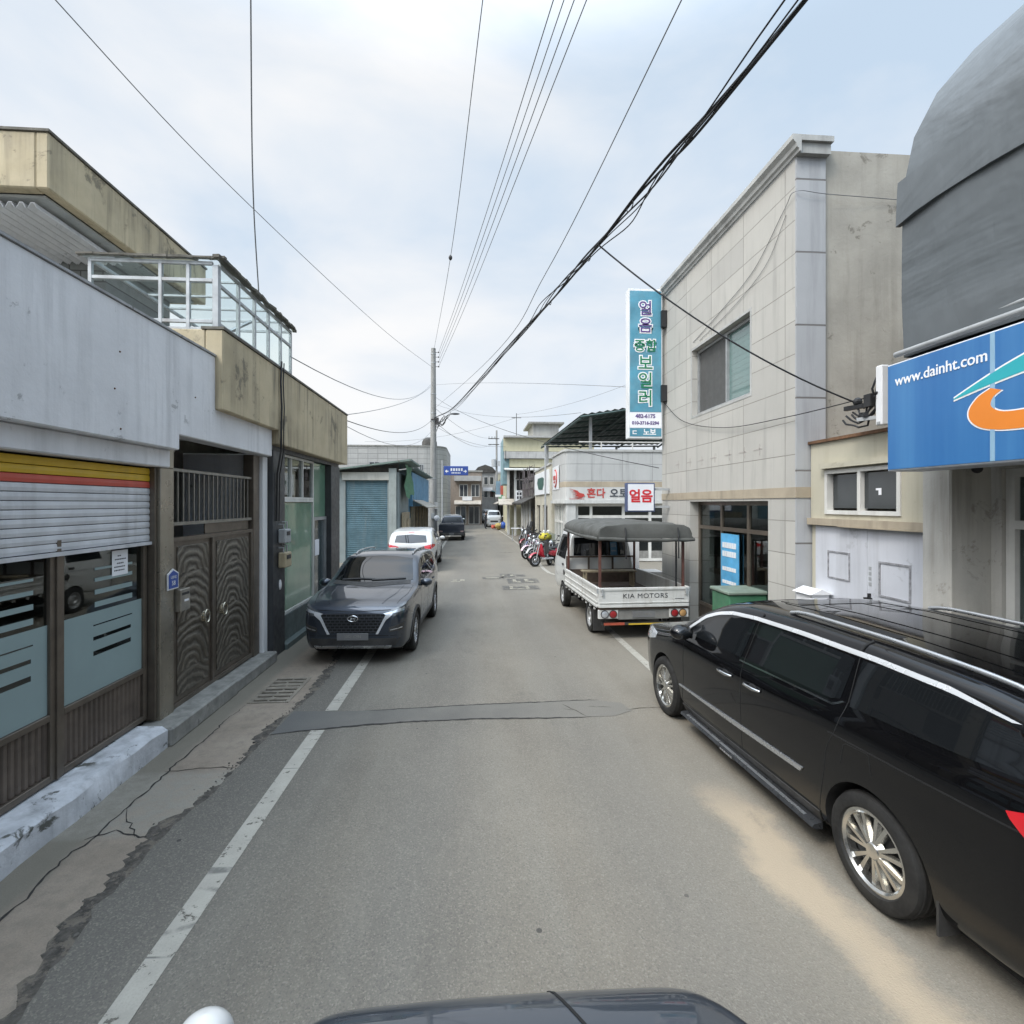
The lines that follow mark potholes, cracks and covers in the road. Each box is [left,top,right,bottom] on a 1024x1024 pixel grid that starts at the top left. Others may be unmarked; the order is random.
drain grate [247,677,311,704]
crack [0,706,244,921]
